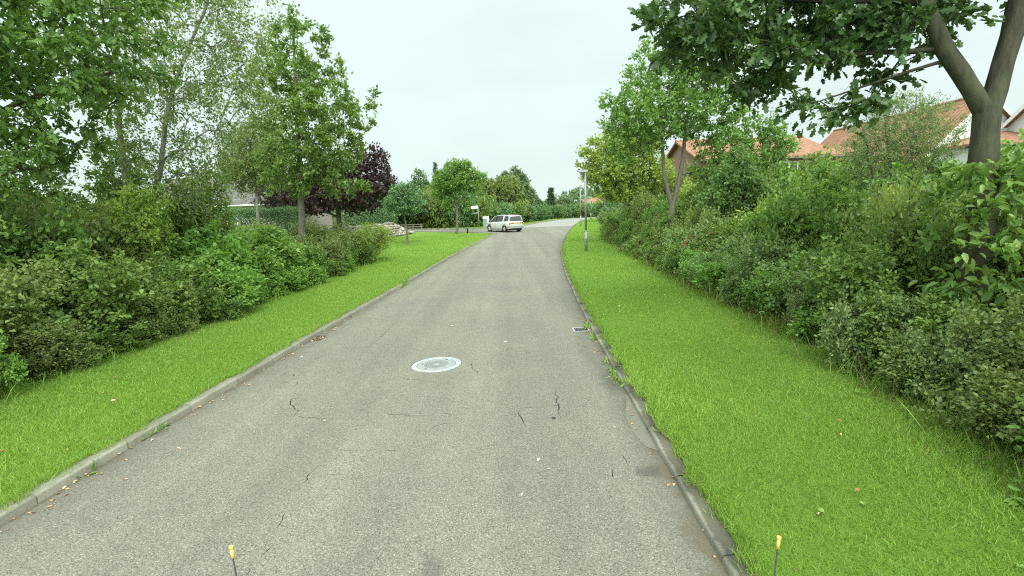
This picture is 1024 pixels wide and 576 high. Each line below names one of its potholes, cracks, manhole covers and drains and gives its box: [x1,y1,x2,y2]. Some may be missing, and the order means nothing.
manhole cover [411,357,461,372]
